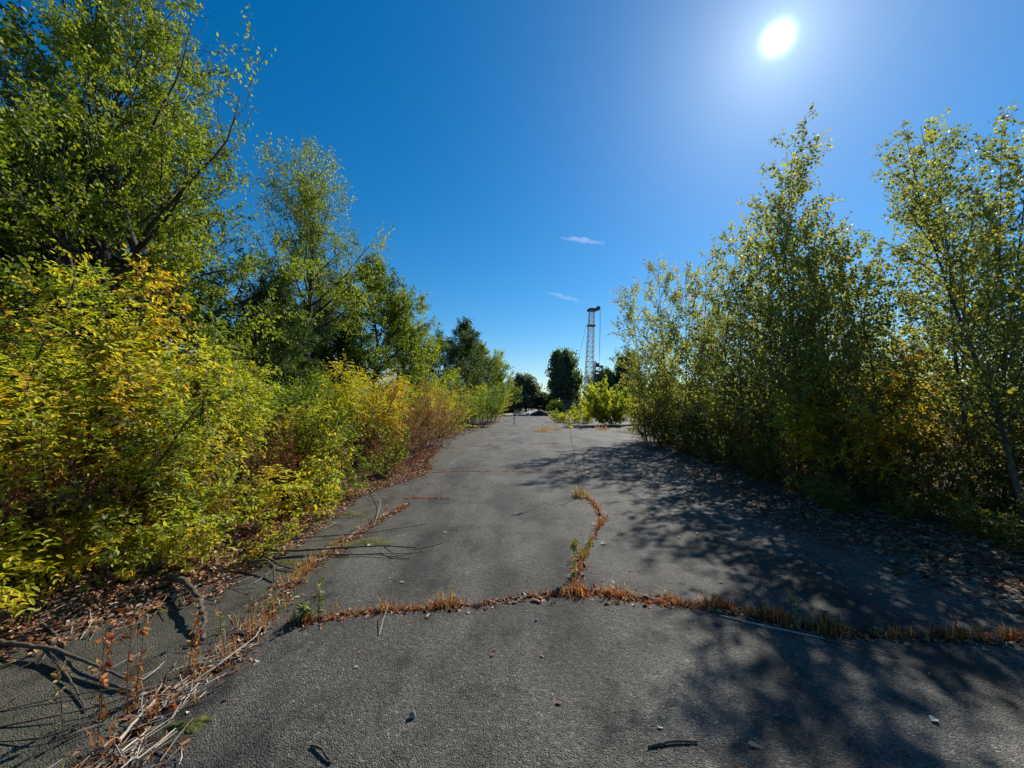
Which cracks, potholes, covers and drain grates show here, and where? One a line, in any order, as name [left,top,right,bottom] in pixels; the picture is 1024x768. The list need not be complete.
crack [286,498,999,646]
crack [99,520,379,768]
